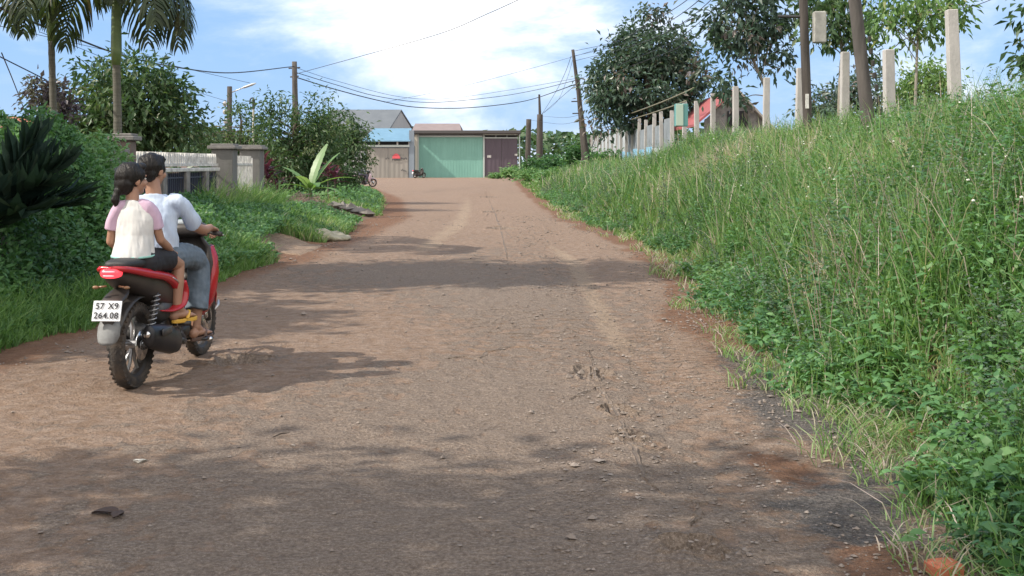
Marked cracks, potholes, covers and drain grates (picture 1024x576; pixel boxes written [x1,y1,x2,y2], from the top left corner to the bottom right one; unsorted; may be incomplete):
crack [448,306,588,363]
pothole [182,352,291,372]
